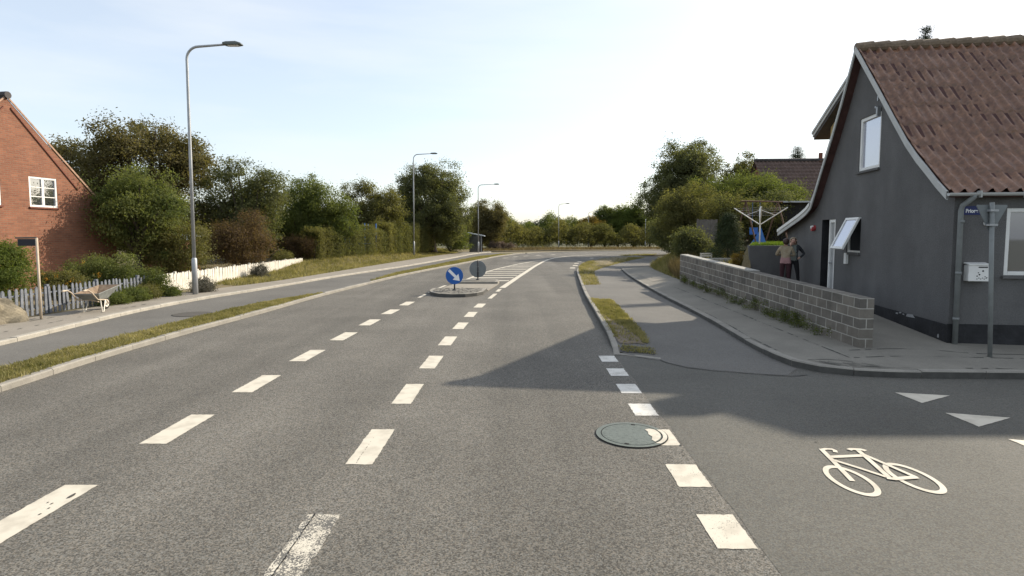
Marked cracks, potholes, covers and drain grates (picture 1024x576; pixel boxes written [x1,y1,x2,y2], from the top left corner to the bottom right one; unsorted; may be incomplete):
manhole cover [595,422,668,448]
